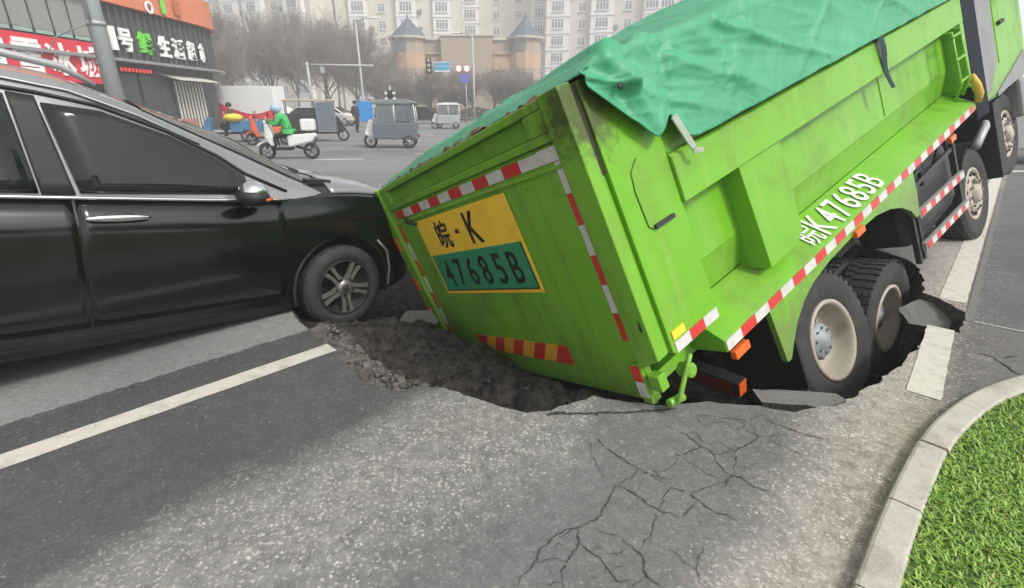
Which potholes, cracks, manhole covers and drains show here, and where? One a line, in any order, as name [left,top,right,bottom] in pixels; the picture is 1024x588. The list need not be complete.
crack [546,408,676,416]
crack [518,414,887,587]
